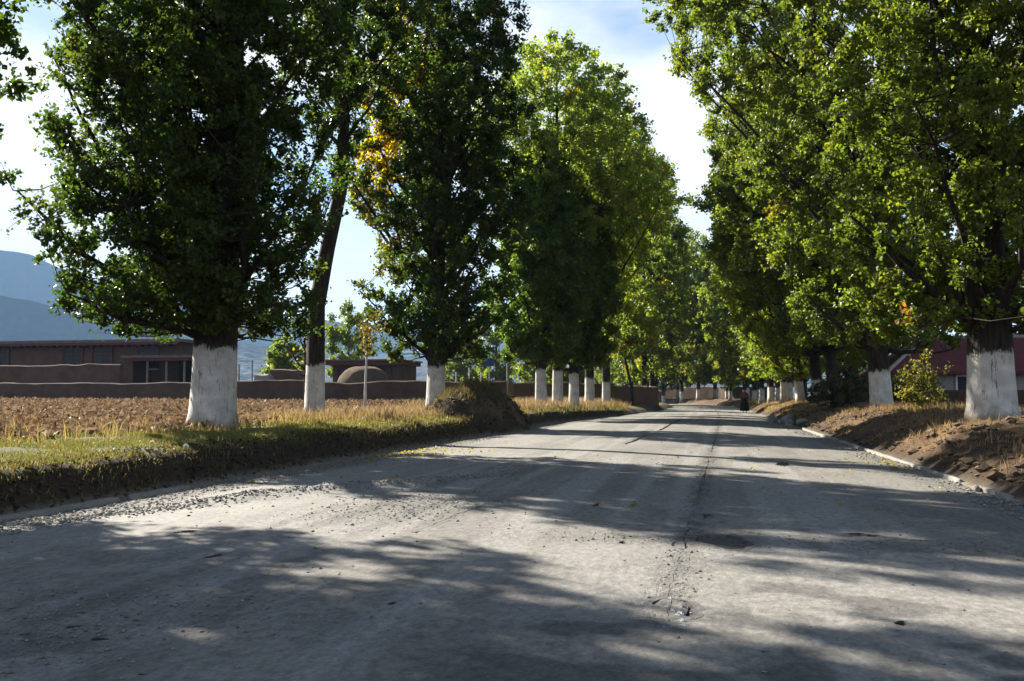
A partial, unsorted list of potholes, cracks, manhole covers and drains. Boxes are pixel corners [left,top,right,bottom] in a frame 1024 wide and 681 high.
crack [623,408,721,619]
pothole [641,590,706,627]
